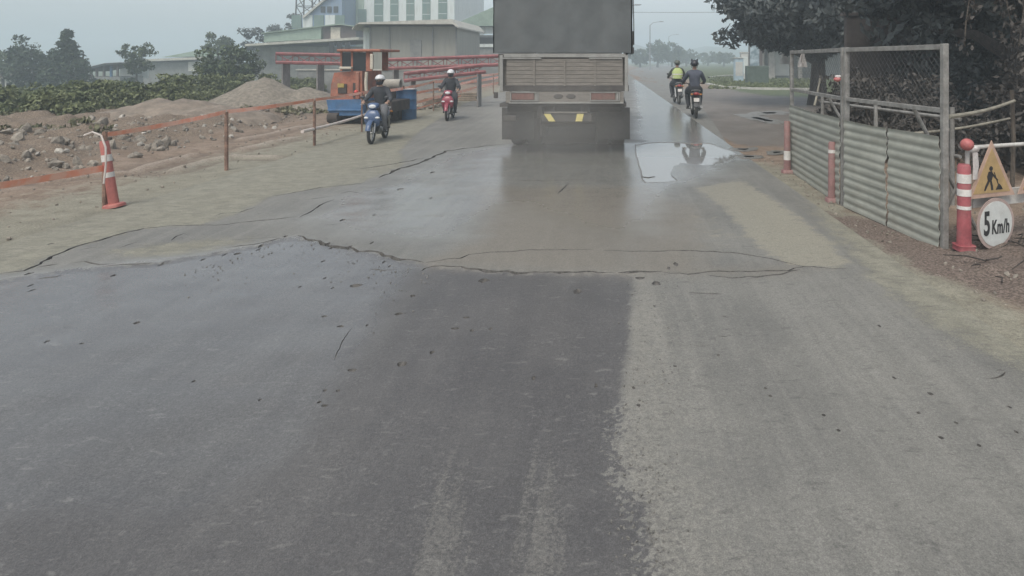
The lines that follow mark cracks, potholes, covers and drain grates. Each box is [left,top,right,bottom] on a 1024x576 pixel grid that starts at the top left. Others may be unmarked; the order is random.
crack [1,143,509,279]
crack [422,249,843,294]
